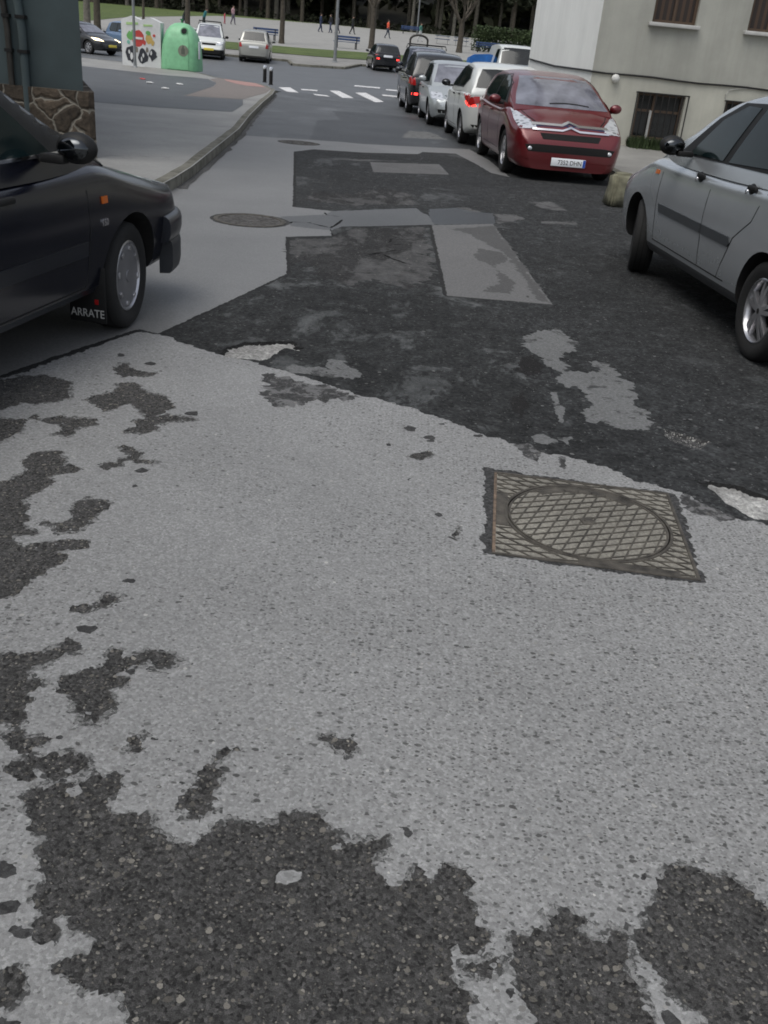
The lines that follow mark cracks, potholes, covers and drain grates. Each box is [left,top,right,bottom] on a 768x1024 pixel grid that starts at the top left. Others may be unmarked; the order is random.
manhole cover [210,213,290,228]
crack [368,237,430,265]
manhole cover [479,467,707,583]
